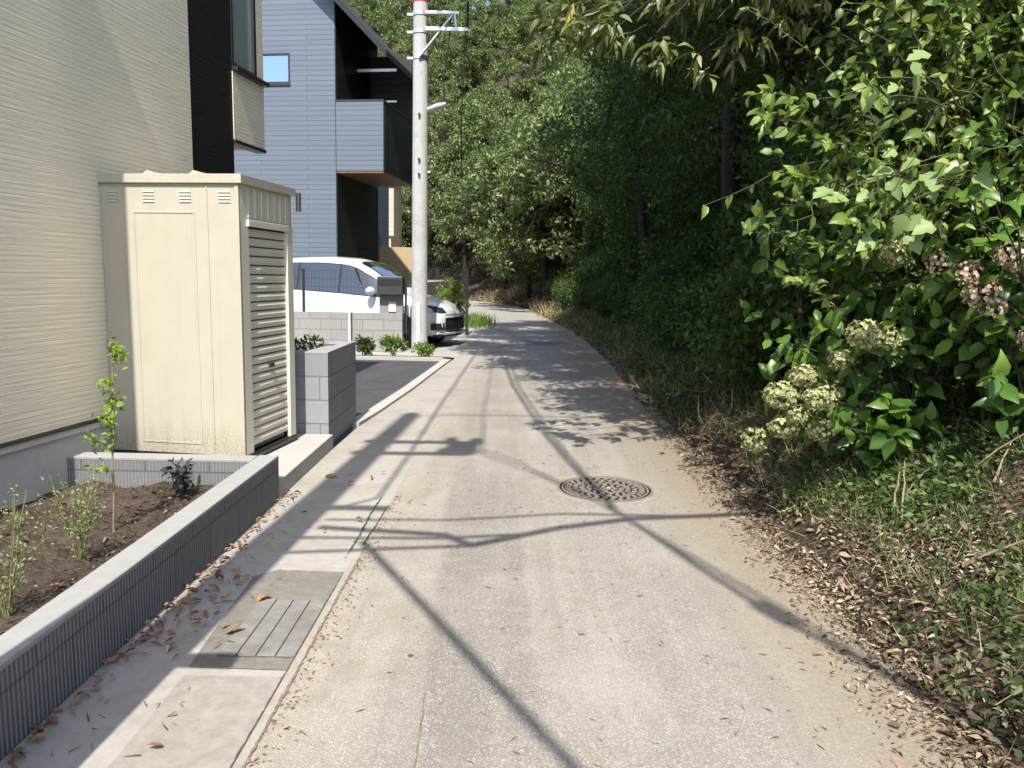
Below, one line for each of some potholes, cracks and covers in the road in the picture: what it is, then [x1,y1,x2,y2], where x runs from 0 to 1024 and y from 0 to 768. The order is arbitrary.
manhole cover [549,474,662,506]
